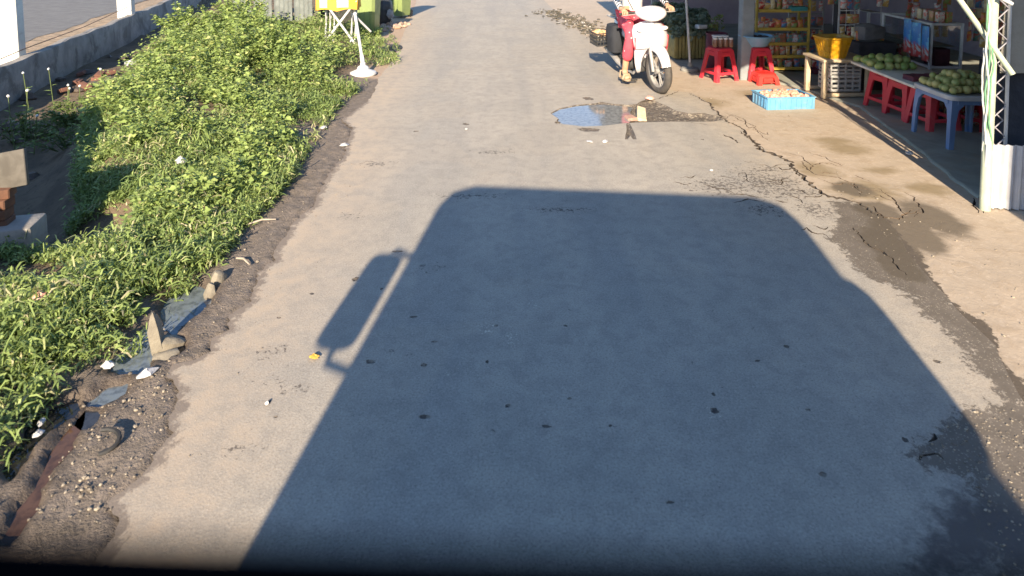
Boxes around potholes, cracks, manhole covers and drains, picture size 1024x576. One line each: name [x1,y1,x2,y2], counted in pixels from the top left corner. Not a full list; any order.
pothole [551,99,723,126]
crack [642,92,924,274]
